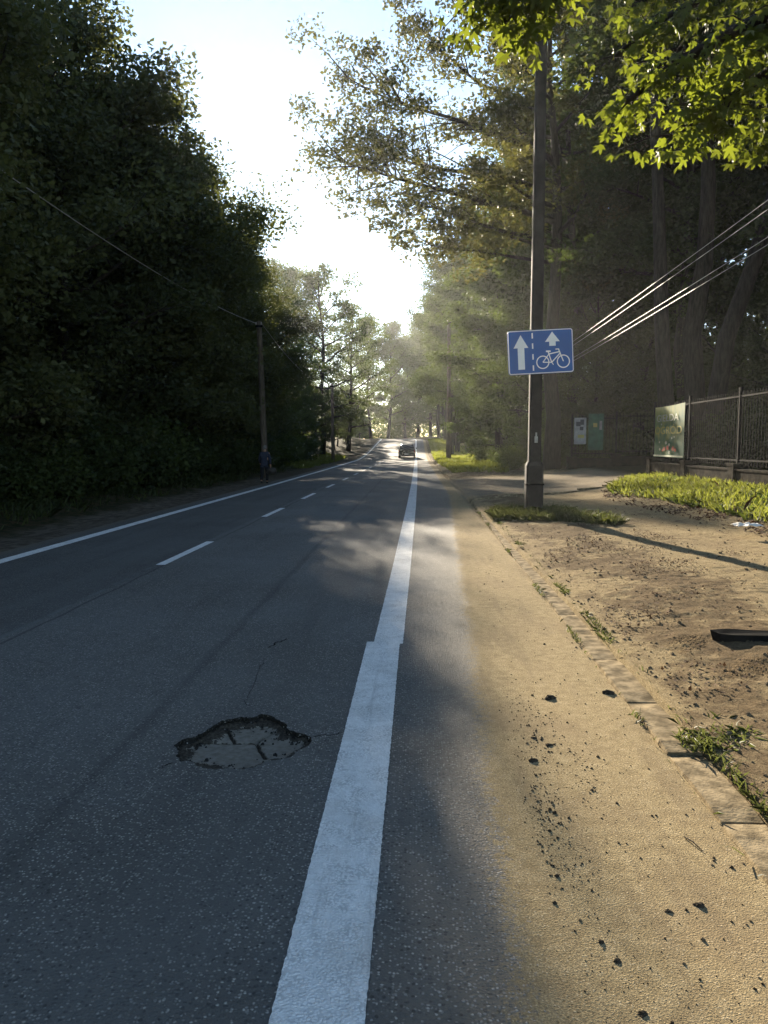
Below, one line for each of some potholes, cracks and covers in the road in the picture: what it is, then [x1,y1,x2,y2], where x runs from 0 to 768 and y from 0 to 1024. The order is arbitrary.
pothole [174,714,312,769]
